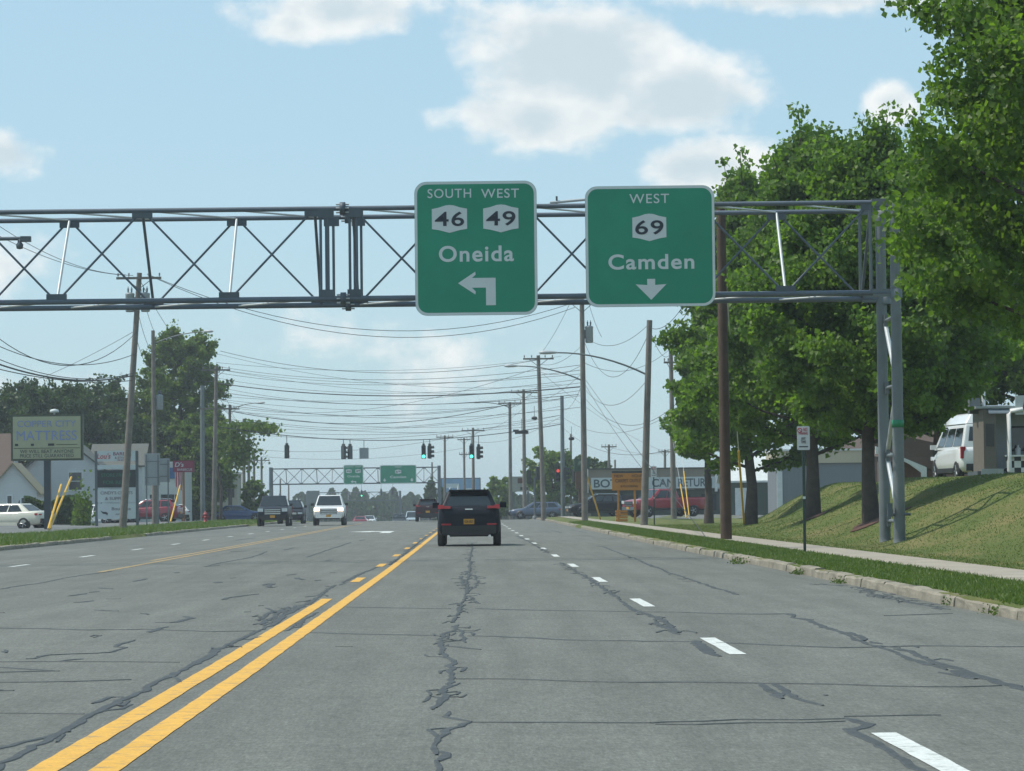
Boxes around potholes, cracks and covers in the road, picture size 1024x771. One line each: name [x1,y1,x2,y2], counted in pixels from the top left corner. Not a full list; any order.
crack [2,571,113,611]
crack [758,584,1024,706]
crack [0,649,132,691]
